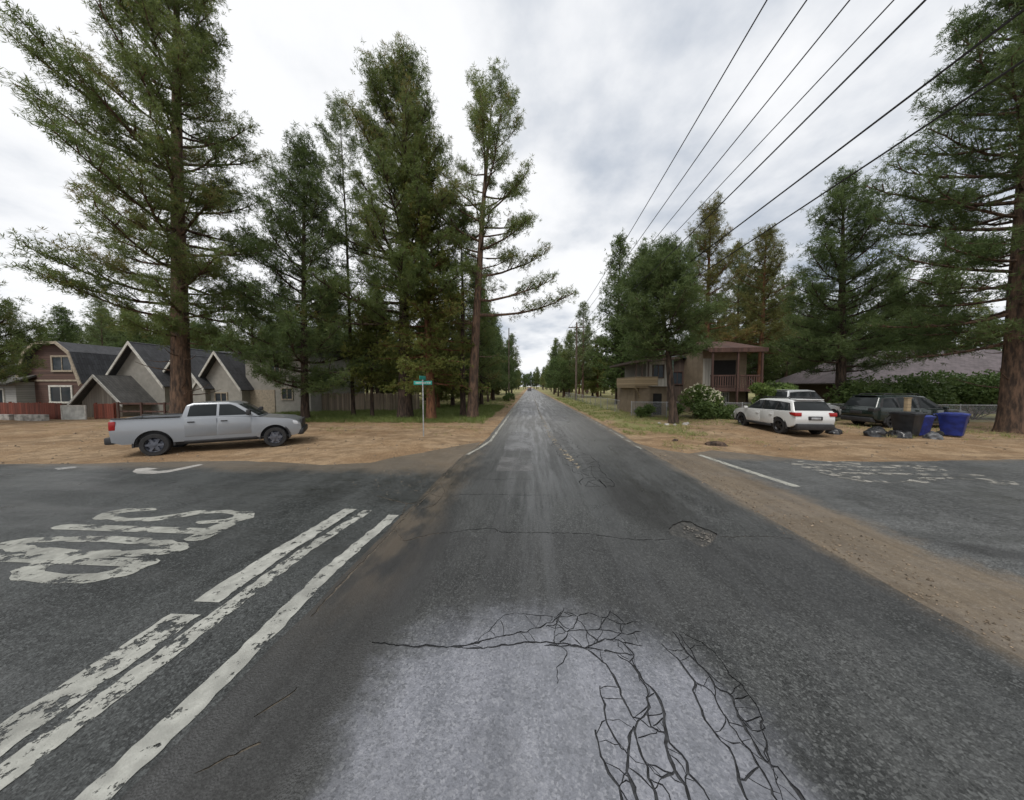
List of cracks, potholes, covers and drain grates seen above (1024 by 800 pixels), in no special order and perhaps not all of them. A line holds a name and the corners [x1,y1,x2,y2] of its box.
pothole [669,521,717,547]
crack [194,742,261,774]
crack [373,609,806,800]
crack [379,485,664,541]
crack [255,687,297,716]
crack [544,420,615,487]
